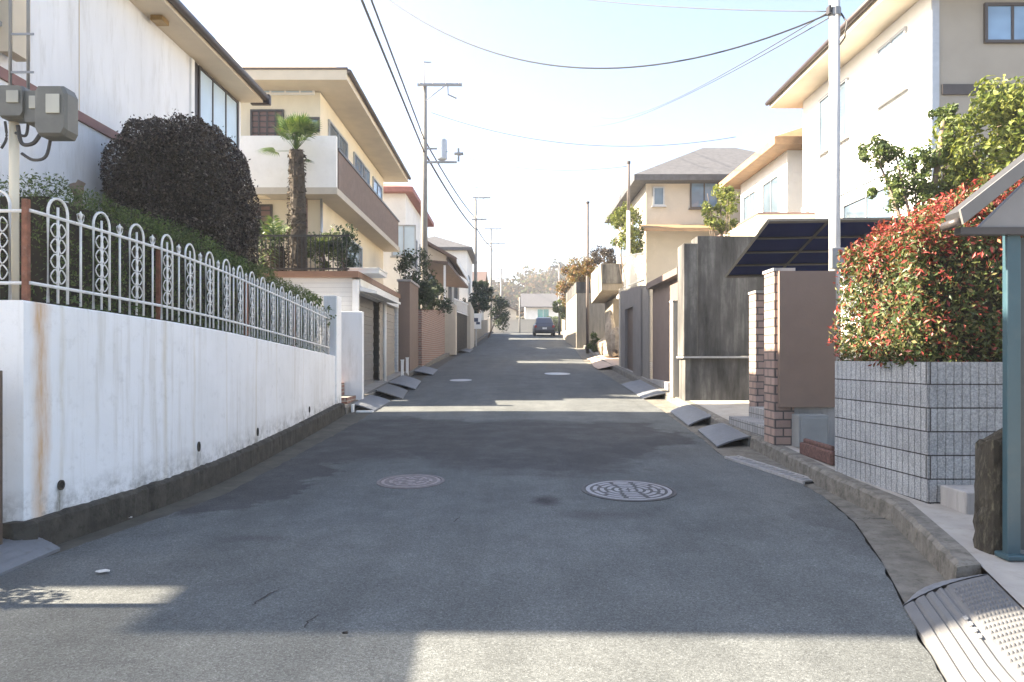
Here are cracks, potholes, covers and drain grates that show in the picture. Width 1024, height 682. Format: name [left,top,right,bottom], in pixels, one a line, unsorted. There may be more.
drain grate [724,455,814,485]
manhole cover [581,480,677,502]
manhole cover [377,474,445,489]
